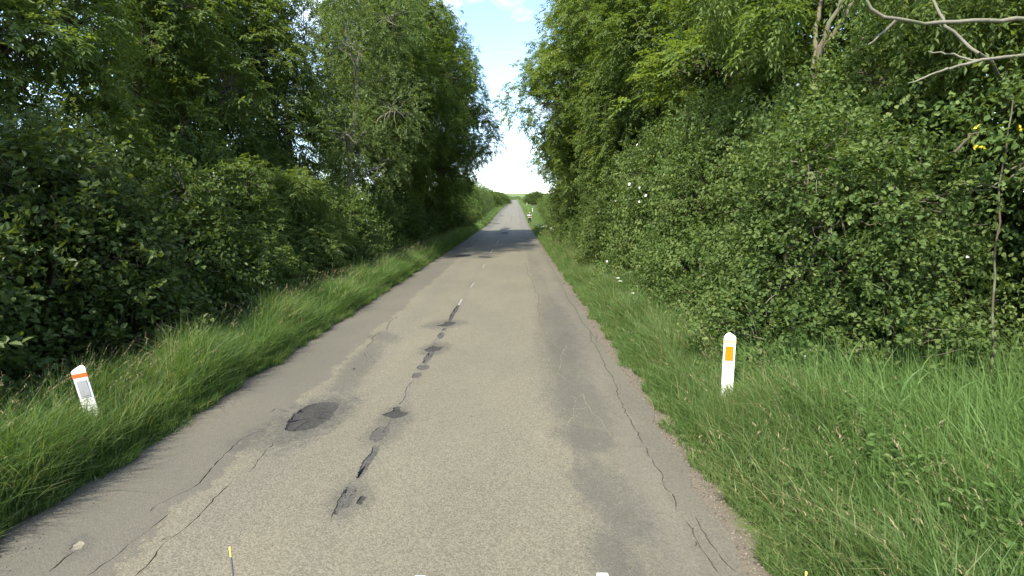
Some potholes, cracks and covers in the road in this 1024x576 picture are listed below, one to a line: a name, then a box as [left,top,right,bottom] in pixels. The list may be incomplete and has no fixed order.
pothole [334,485,357,515]
crack [524,260,740,575]
pothole [356,445,381,478]
crack [136,409,292,575]
